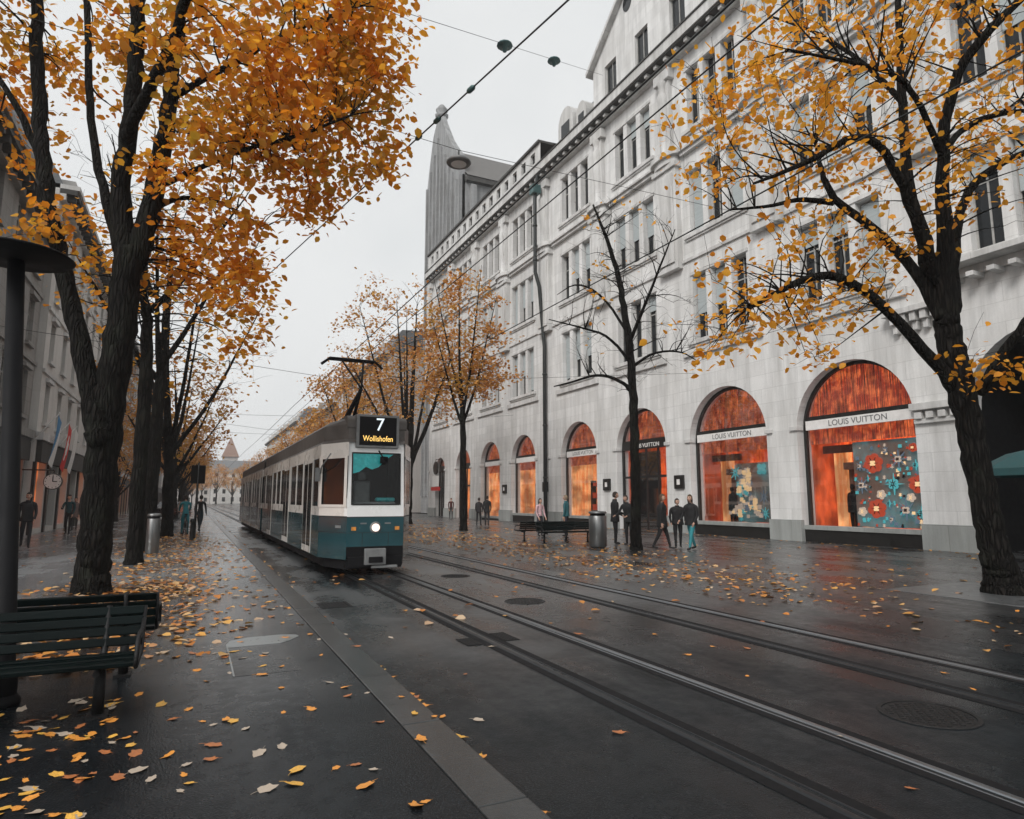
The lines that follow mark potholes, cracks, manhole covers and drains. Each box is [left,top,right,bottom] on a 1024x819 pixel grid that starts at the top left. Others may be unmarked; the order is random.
manhole cover [876,700,984,730]
